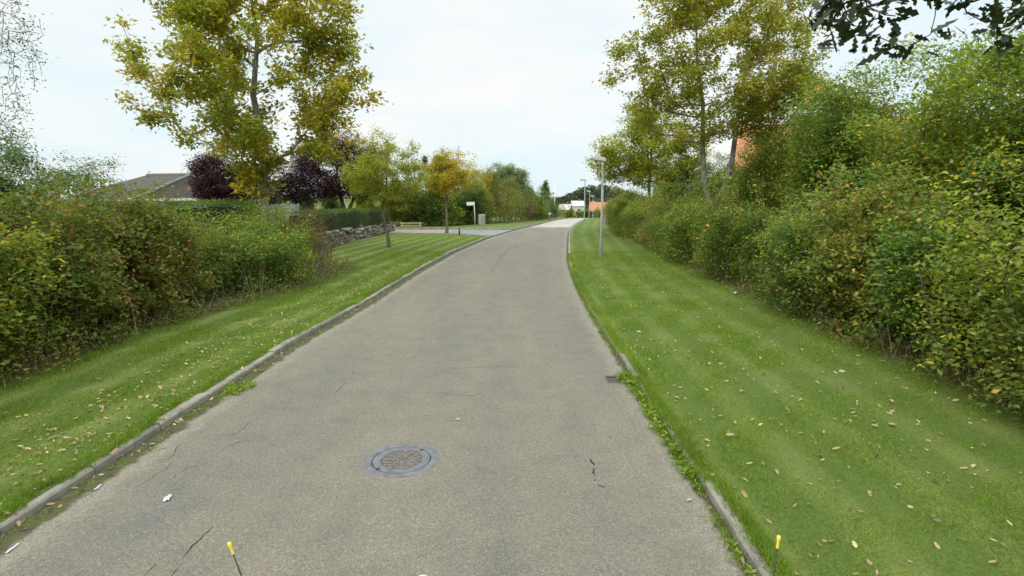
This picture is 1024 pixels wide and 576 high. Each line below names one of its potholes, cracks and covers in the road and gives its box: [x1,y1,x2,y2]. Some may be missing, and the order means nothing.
crack [145,526,214,576]
manhole cover [363,443,439,478]
crack [135,425,247,488]
